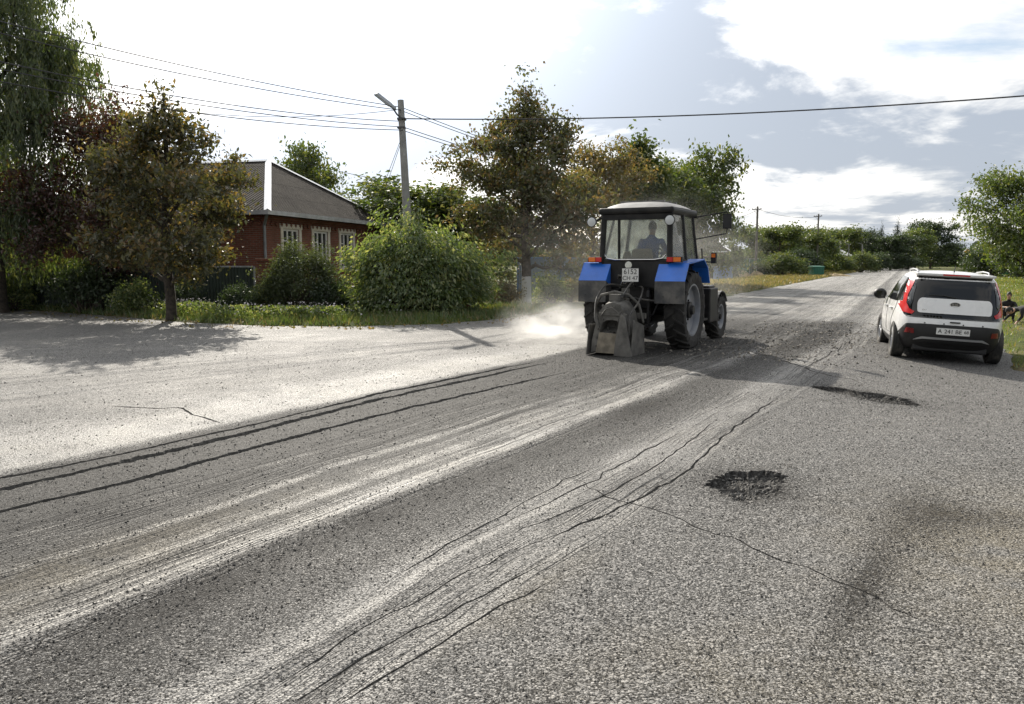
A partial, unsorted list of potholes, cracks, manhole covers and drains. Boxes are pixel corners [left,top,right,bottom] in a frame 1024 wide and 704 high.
pothole [704,470,789,504]
pothole [813,386,921,406]
crack [566,476,977,644]
crack [117,406,220,423]
